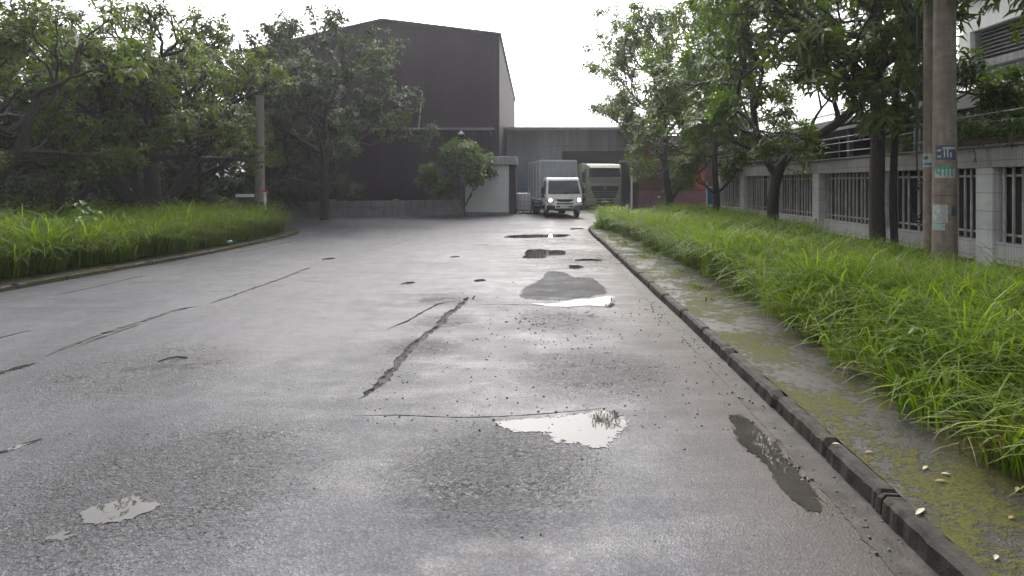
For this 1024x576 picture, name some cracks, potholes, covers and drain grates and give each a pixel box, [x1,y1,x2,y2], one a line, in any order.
crack [361,294,541,398]
crack [47,267,311,356]
crack [356,407,611,418]
pothole [522,249,566,259]
